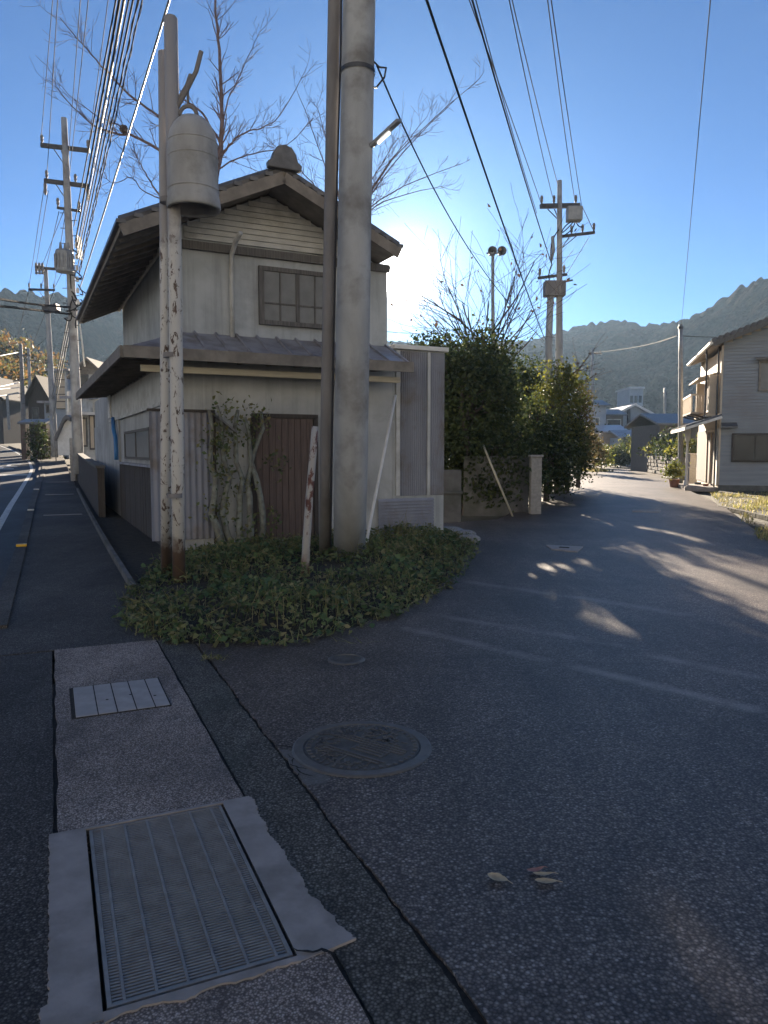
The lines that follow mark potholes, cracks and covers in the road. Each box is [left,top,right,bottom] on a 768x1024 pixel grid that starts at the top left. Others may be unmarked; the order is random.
manhole cover [328,654,365,665]
crack [277,745,312,779]
manhole cover [292,721,432,778]
drain grate [39,796,356,1024]
